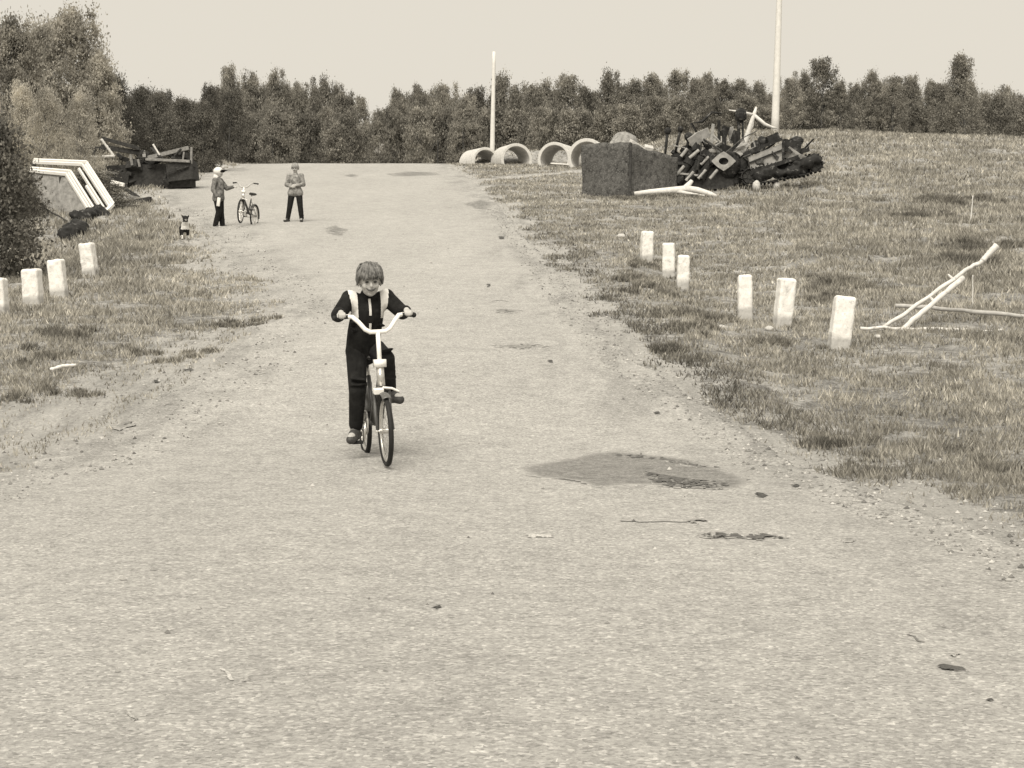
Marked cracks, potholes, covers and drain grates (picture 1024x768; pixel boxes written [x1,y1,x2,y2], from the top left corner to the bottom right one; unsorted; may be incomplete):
pothole [698,532,789,540]
